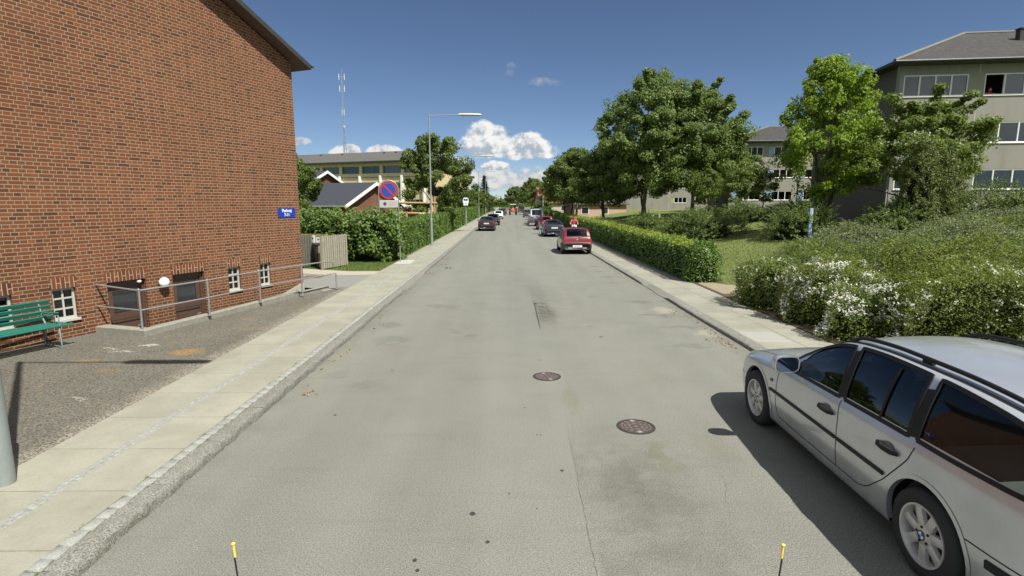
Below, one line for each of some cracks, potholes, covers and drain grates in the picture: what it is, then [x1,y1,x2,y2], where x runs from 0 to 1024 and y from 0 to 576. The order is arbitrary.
manhole cover [616,419,656,435]
manhole cover [533,372,561,381]
